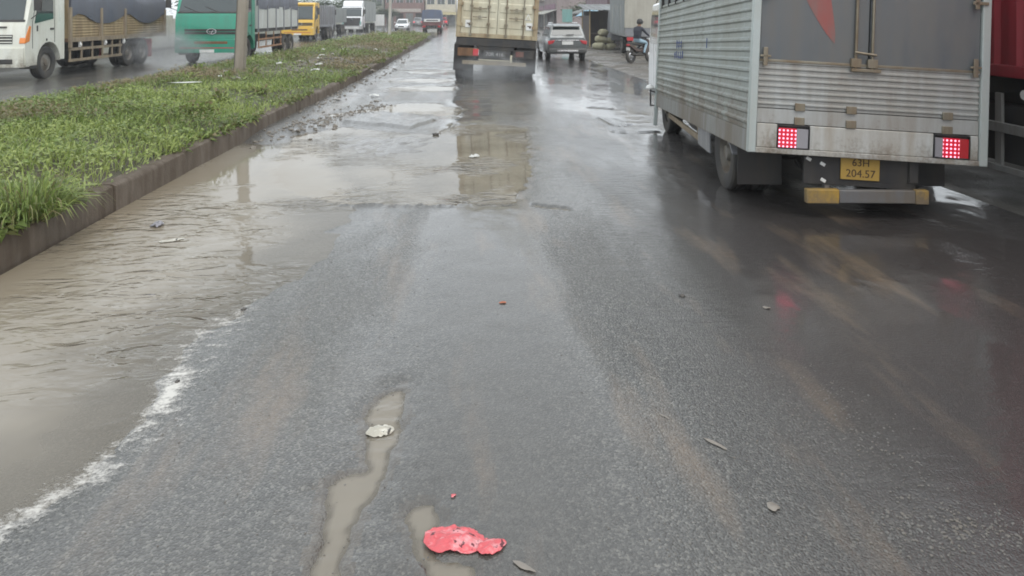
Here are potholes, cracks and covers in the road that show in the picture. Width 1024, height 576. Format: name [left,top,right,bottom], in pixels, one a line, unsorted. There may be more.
pothole [298,380,416,576]
pothole [392,494,484,576]
pothole [285,124,538,206]
pothole [318,102,461,119]
